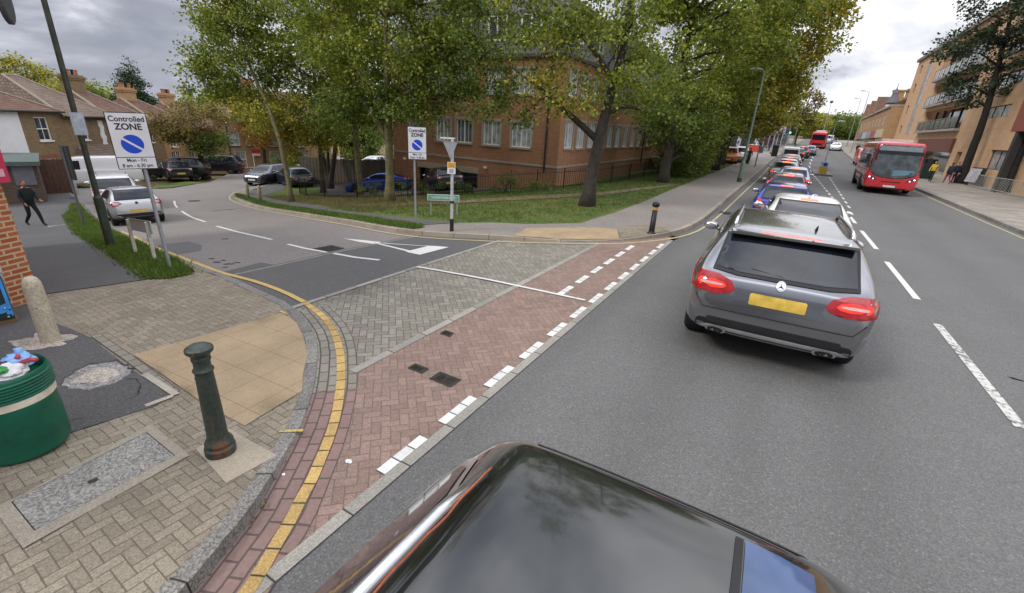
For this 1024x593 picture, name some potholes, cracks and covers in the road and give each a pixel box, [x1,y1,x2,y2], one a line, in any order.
manhole cover [408,363,429,373]
utility cover [0,424,189,548]
manhole cover [429,371,461,387]
